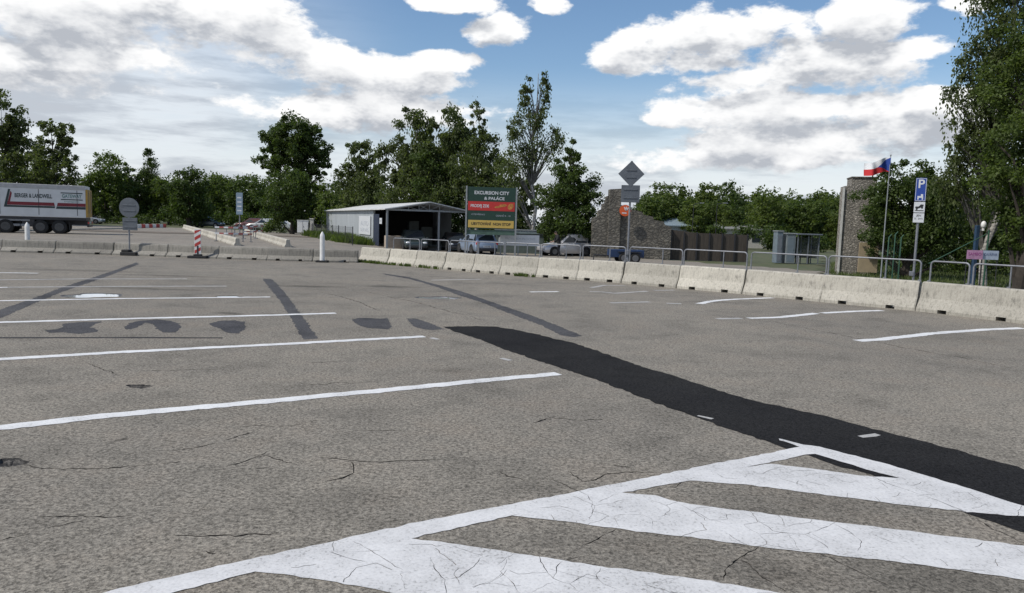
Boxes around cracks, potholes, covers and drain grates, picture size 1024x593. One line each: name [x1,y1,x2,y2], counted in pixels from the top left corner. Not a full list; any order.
pothole [0,458,29,467]
crack [42,515,130,527]
crack [325,458,439,482]
crack [23,420,317,470]
